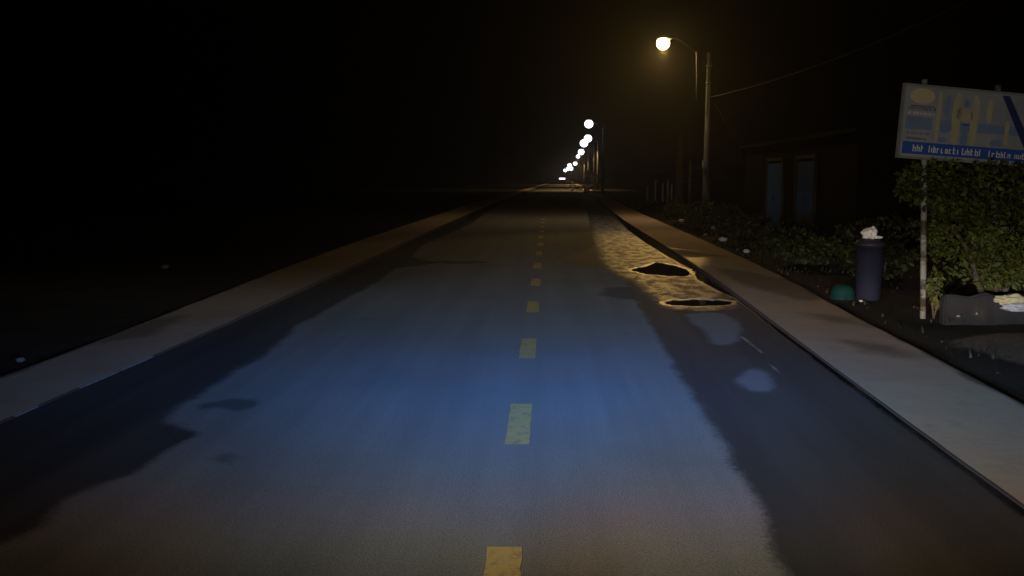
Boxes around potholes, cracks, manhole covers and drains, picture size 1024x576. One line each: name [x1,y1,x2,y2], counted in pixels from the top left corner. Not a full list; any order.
pothole [627,262,696,277]
pothole [659,298,737,307]
